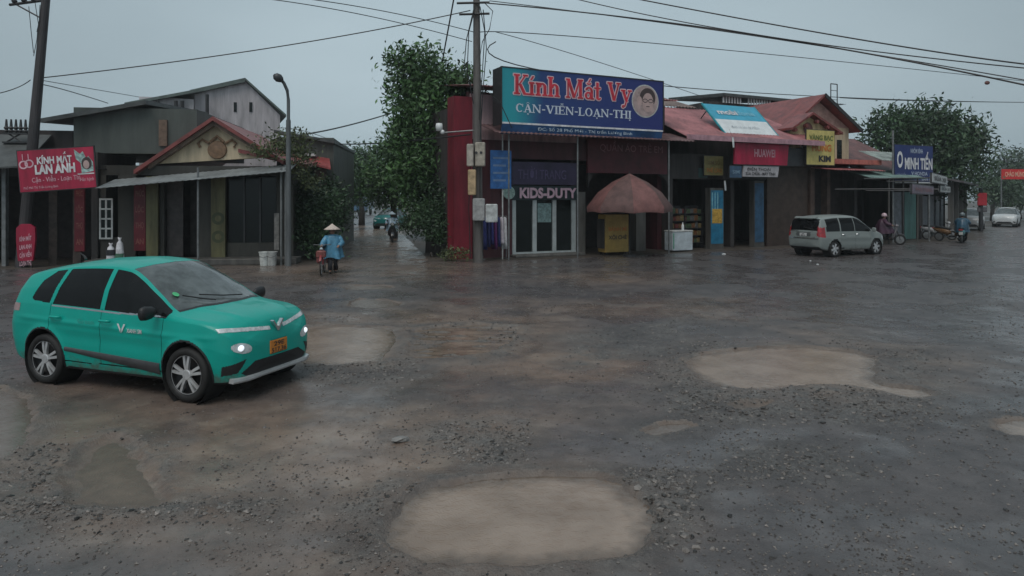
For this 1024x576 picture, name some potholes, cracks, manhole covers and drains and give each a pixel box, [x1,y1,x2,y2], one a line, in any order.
pothole [0,384,40,460]
pothole [49,431,178,510]
pothole [301,324,412,366]
pothole [677,344,941,399]
pothole [371,469,666,569]
pothole [639,419,699,436]
pothole [346,298,405,309]
pothole [987,415,1024,436]
